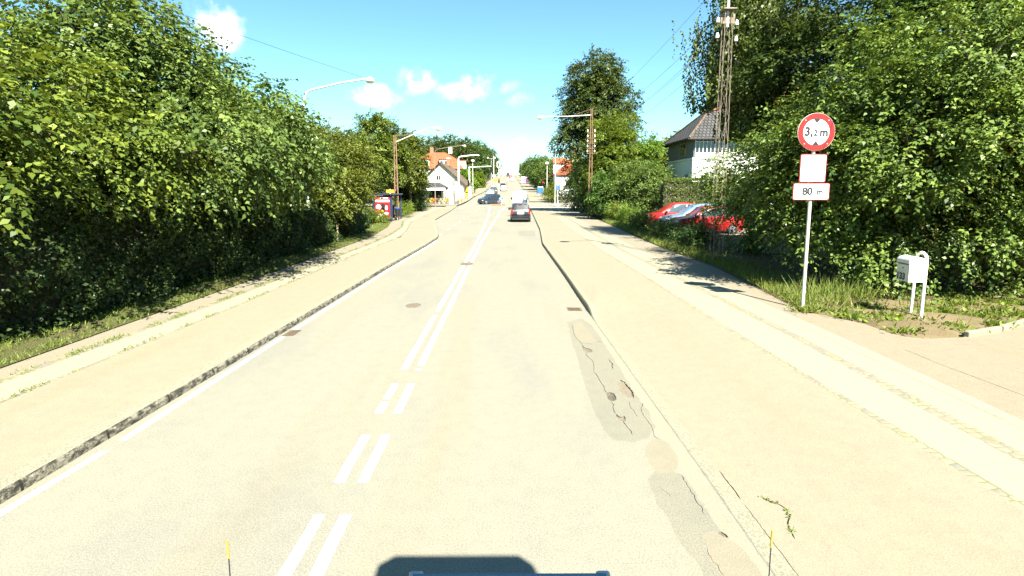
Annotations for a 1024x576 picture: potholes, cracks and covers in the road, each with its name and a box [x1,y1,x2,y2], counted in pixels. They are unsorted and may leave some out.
crack [572,326,798,575]
